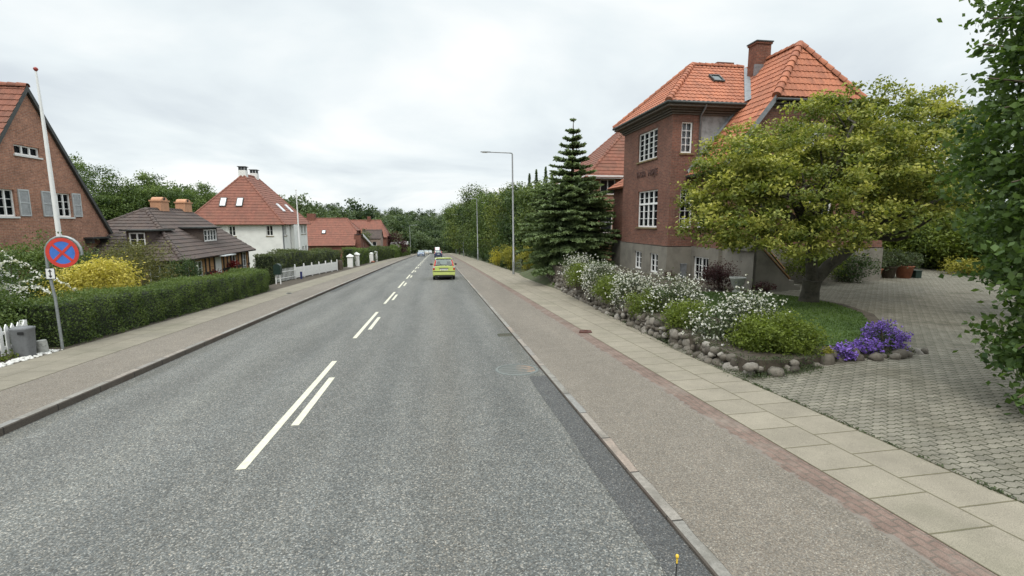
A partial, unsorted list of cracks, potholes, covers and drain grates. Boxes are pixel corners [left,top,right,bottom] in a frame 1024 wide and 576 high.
manhole cover [495,364,538,375]
